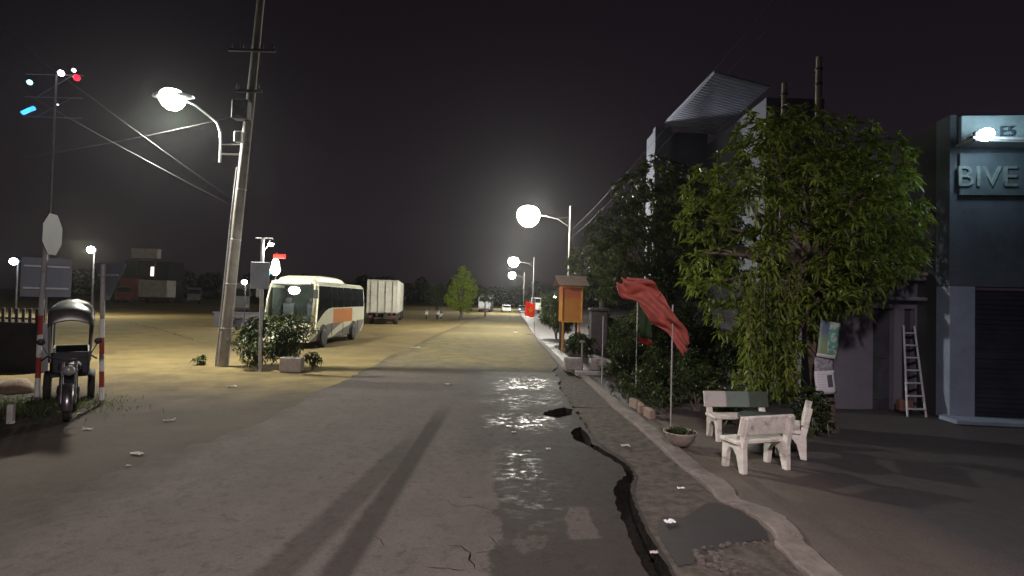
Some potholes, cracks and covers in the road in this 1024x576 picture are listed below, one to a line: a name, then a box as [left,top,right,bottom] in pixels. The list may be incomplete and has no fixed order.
pothole [543,407,573,418]
crack [593,445,672,576]
crack [430,536,497,570]
